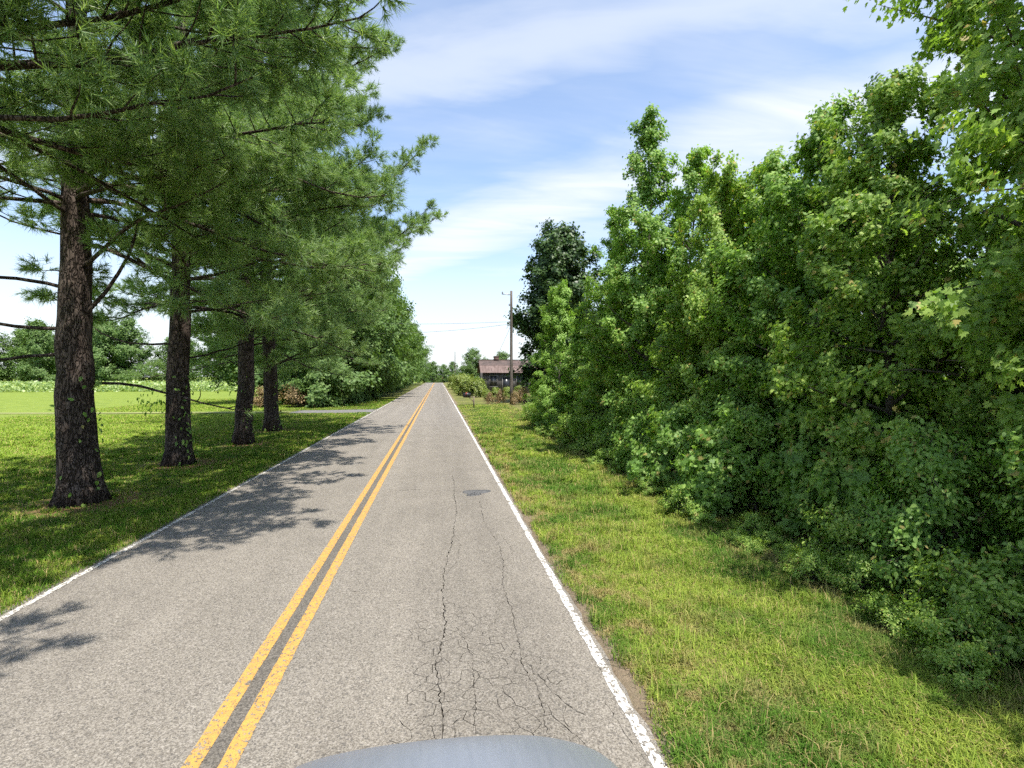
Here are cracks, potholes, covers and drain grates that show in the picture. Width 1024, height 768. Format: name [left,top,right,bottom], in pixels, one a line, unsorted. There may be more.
crack [389,476,587,744]
